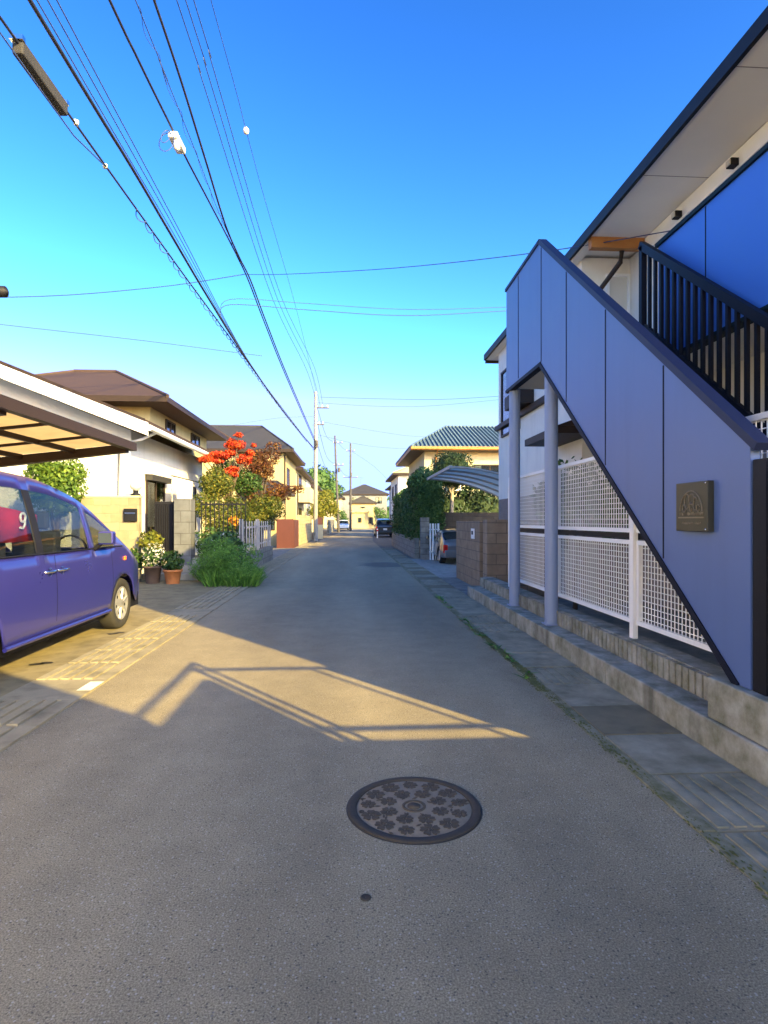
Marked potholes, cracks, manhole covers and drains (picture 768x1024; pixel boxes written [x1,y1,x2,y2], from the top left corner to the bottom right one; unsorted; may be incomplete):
manhole cover [346,777,483,845]
